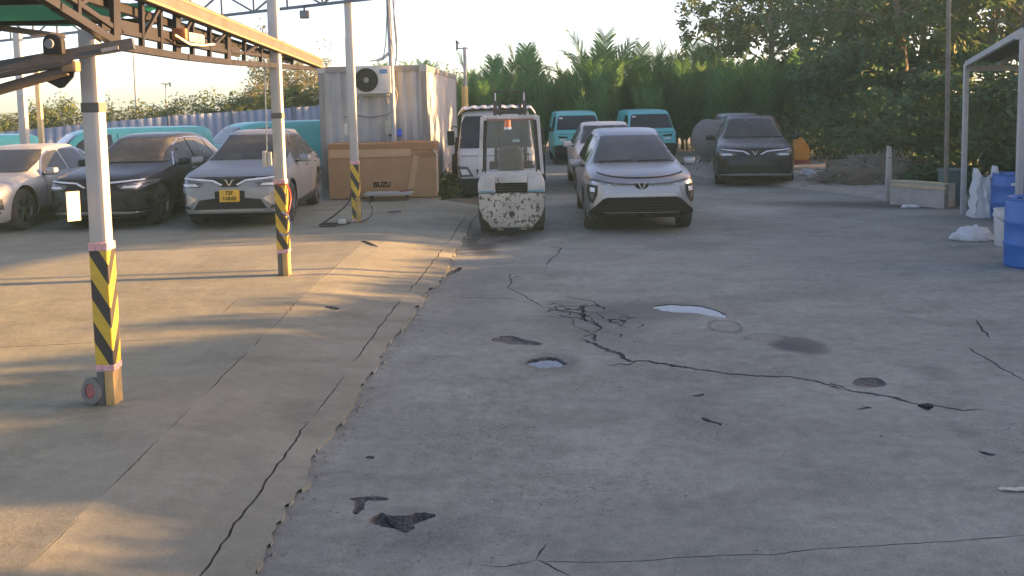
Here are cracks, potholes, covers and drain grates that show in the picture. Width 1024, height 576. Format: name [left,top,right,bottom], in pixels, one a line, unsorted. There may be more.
pothole [525,357,569,369]
pothole [491,336,542,346]
crack [507,274,1023,411]
pothole [368,512,436,533]
pothole [350,495,388,514]
crack [482,535,1024,576]
pothole [652,303,727,318]
